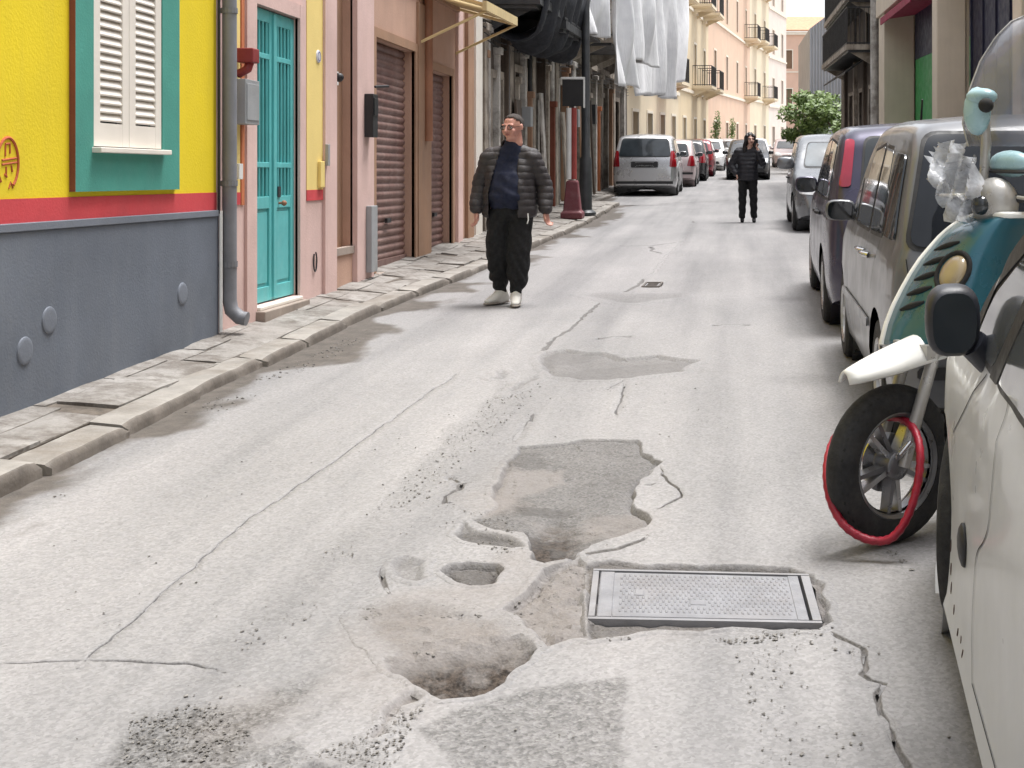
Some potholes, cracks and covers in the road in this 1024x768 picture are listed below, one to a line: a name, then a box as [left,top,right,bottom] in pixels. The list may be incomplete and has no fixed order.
manhole cover [588,569,823,630]
pothole [495,551,600,653]
crack [603,380,635,418]
crack [648,465,690,510]
crack [823,631,921,768]
pothole [467,437,670,566]
pothole [338,593,543,704]
pothole [446,517,529,550]
crack [0,373,474,674]
pothole [433,560,512,588]
